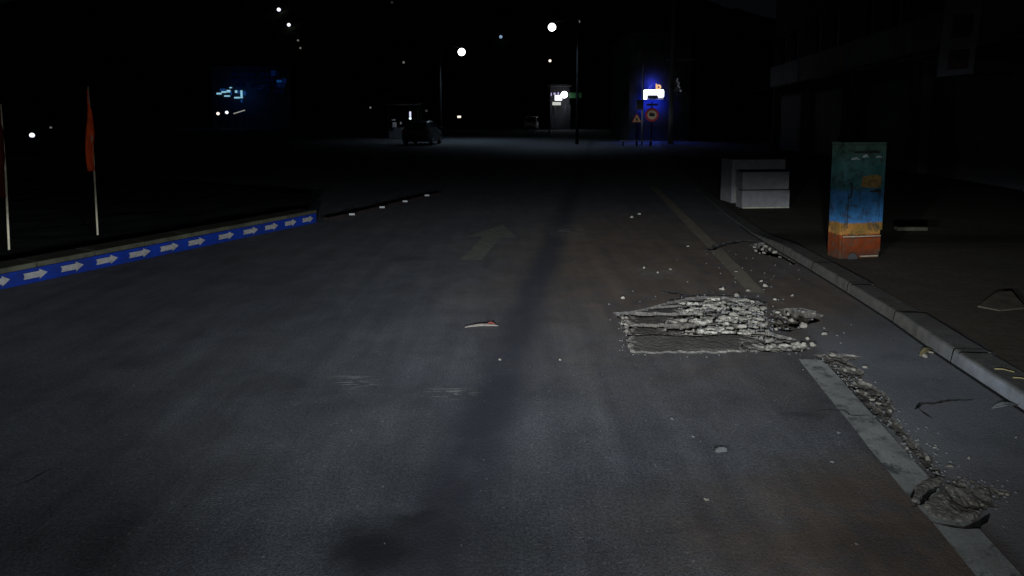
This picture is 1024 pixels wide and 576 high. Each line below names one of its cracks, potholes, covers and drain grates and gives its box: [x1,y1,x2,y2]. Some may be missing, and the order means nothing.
pothole [771,308,823,332]
crack [0,467,53,490]
pothole [944,477,1012,510]
crack [915,399,974,418]
pothole [613,296,811,354]
pothole [814,353,944,477]
crack [706,240,757,250]
